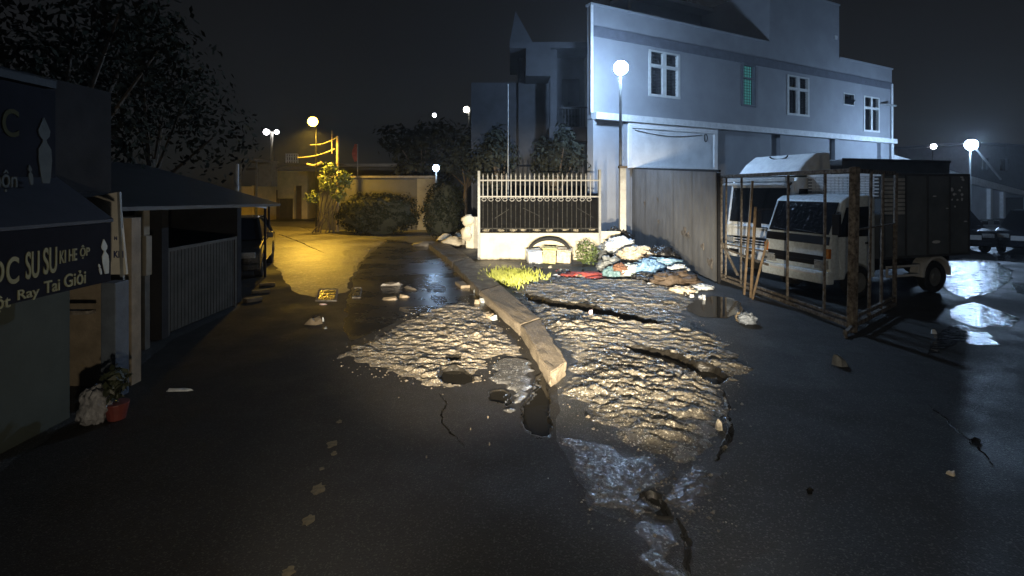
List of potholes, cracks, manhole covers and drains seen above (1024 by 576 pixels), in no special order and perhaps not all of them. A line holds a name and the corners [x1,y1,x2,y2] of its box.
pothole [519,373,554,440]
crack [439,394,466,448]
crack [676,518,693,576]
pothole [436,365,475,385]
crack [715,390,735,462]
pothole [488,389,514,408]
crack [926,403,994,467]
